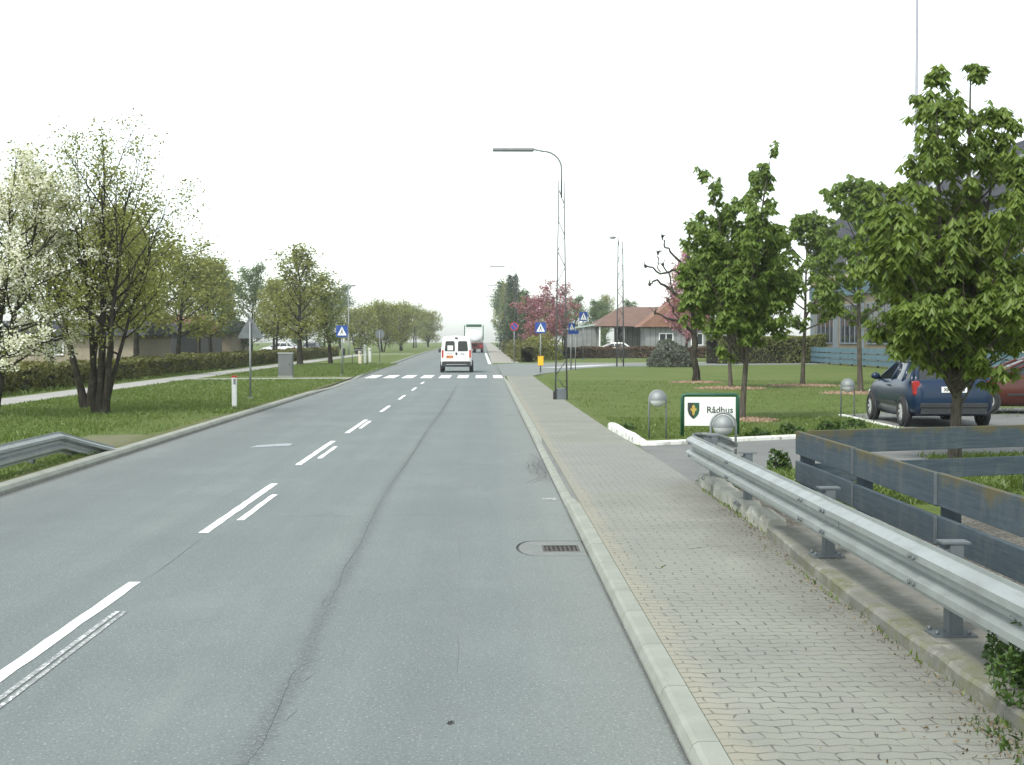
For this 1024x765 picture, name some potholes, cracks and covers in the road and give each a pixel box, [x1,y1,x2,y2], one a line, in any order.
crack [515,452,550,483]
crack [247,395,452,765]
